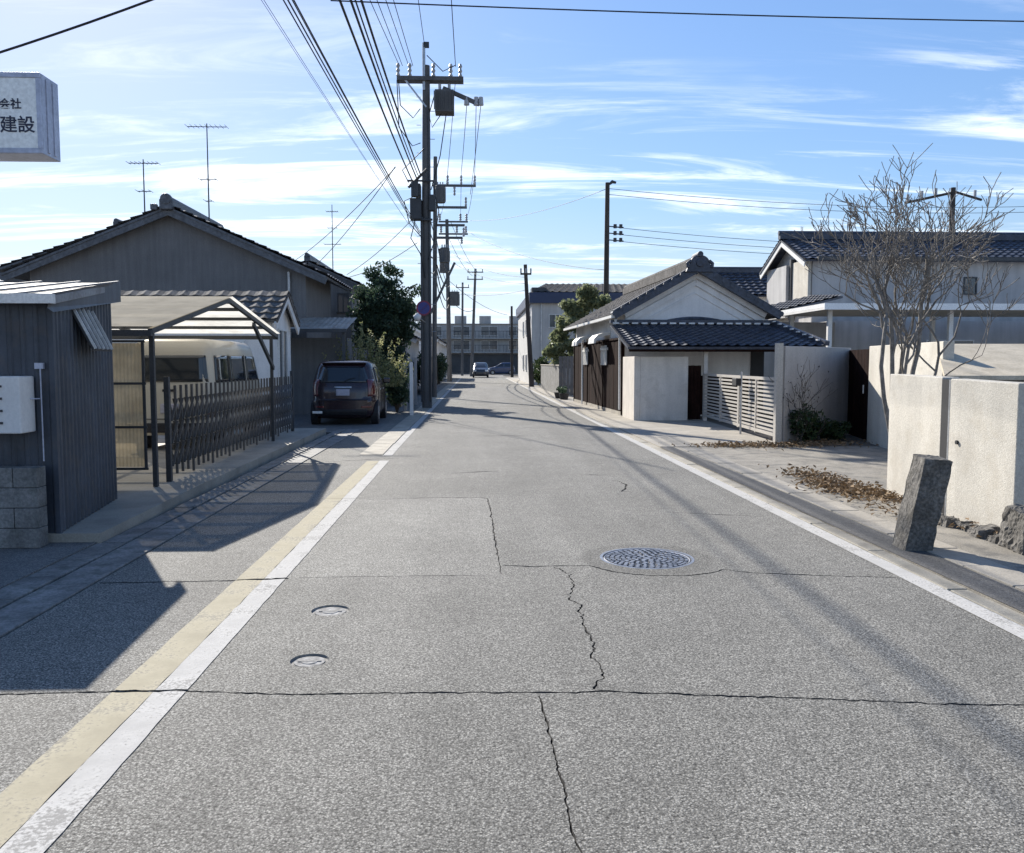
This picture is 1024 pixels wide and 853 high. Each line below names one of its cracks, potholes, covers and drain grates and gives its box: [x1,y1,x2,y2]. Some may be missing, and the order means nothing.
manhole cover [600,548,694,569]
crack [0,565,1024,853]
utility cover [290,654,329,667]
utility cover [311,605,349,616]
